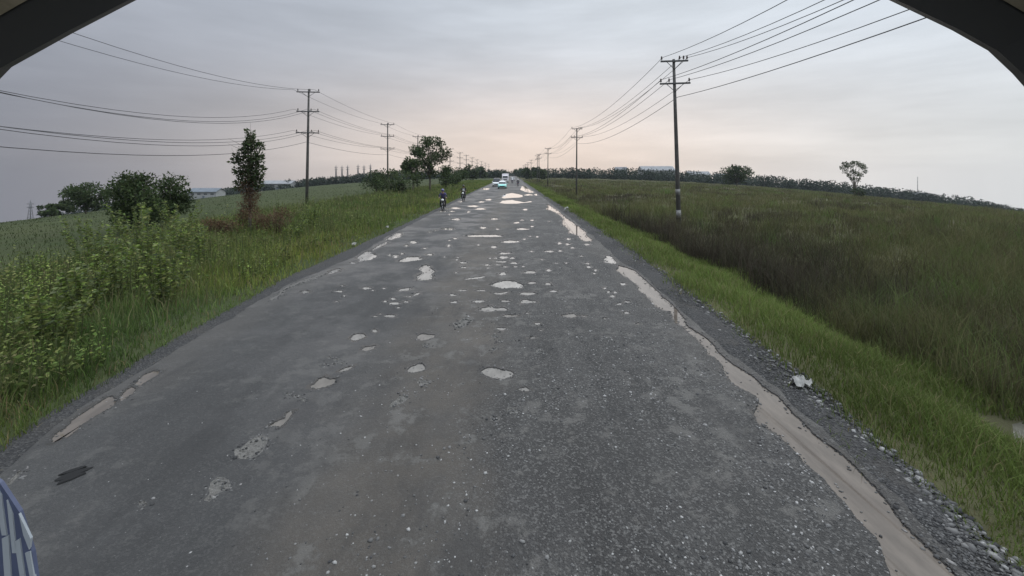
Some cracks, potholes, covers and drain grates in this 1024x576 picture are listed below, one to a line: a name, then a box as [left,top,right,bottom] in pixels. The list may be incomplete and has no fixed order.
pothole [480,367,514,379]
pothole [50,395,117,443]
pothole [310,376,337,389]
pothole [268,411,292,427]
pothole [135,370,162,386]
pothole [546,205,592,241]
pothole [616,265,957,576]
pothole [489,280,524,288]
pothole [234,435,269,459]
pothole [417,264,435,280]
pothole [407,363,426,373]
pothole [204,477,231,502]
